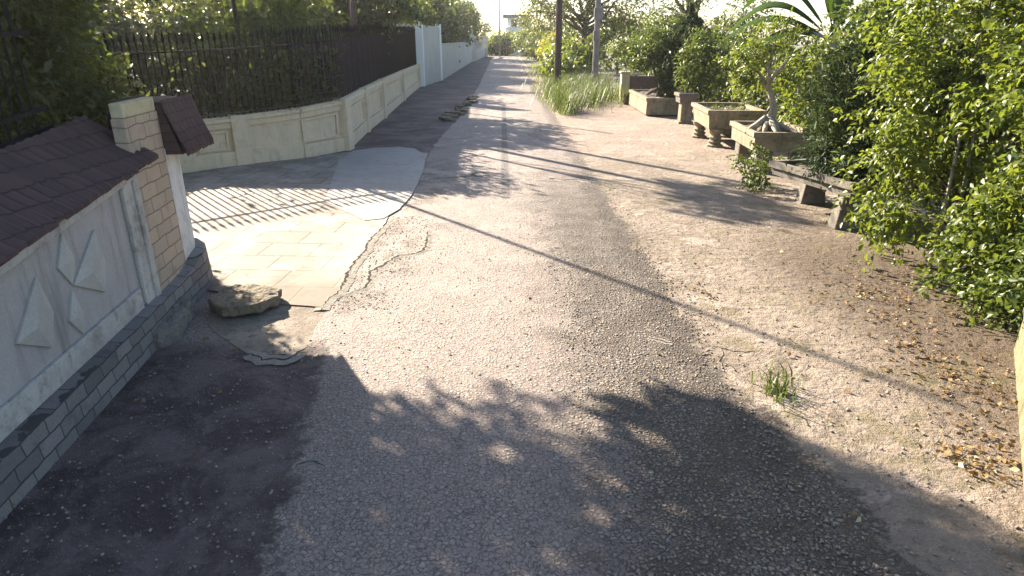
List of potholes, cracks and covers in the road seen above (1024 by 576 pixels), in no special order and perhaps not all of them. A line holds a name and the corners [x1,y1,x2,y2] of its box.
crack [291,459,327,469]
crack [313,226,433,311]
crack [714,346,755,373]
